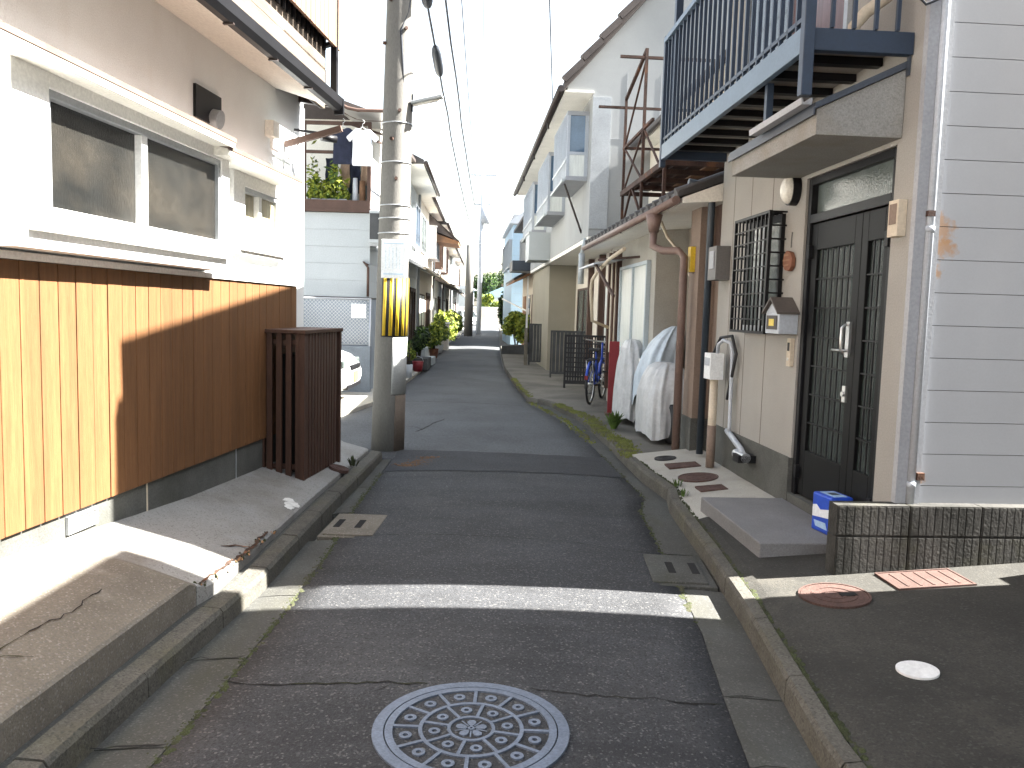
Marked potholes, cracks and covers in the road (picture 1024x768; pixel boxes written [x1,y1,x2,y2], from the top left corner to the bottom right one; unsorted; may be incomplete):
manhole cover [798,582,872,609]
crack [0,589,102,657]
utility cover [895,661,940,680]
manhole cover [678,472,719,483]
crack [221,680,773,704]
manhole cover [371,682,570,768]
